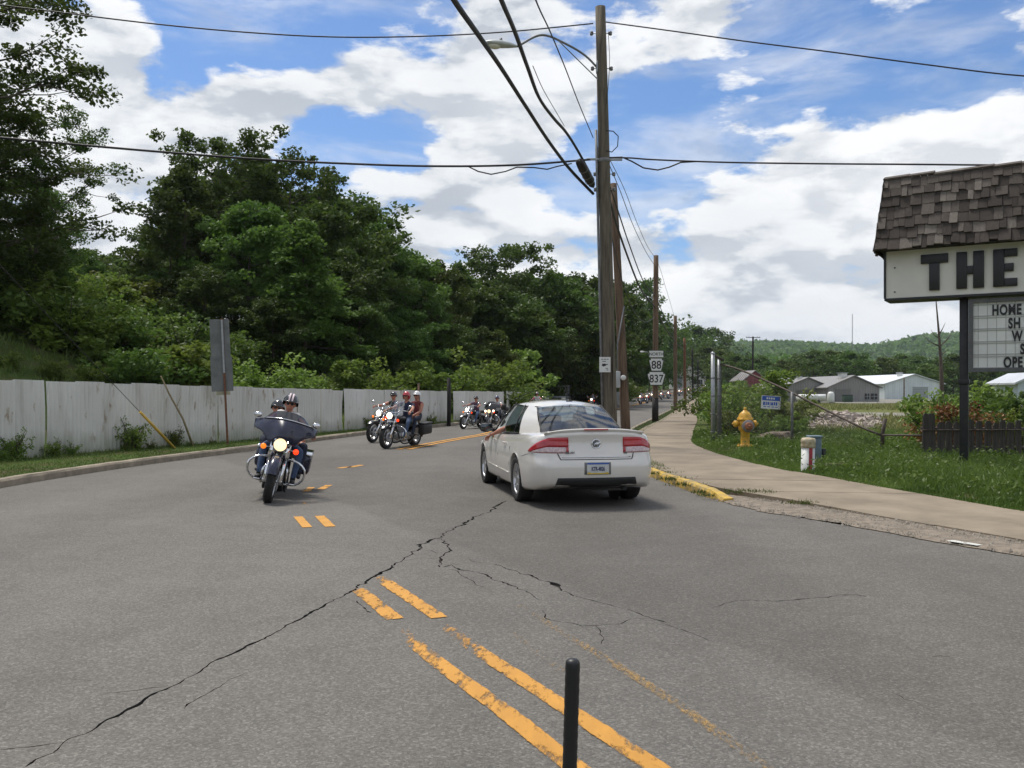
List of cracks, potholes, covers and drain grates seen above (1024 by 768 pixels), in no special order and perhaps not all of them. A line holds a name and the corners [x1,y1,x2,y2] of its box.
crack [2,501,709,767]
